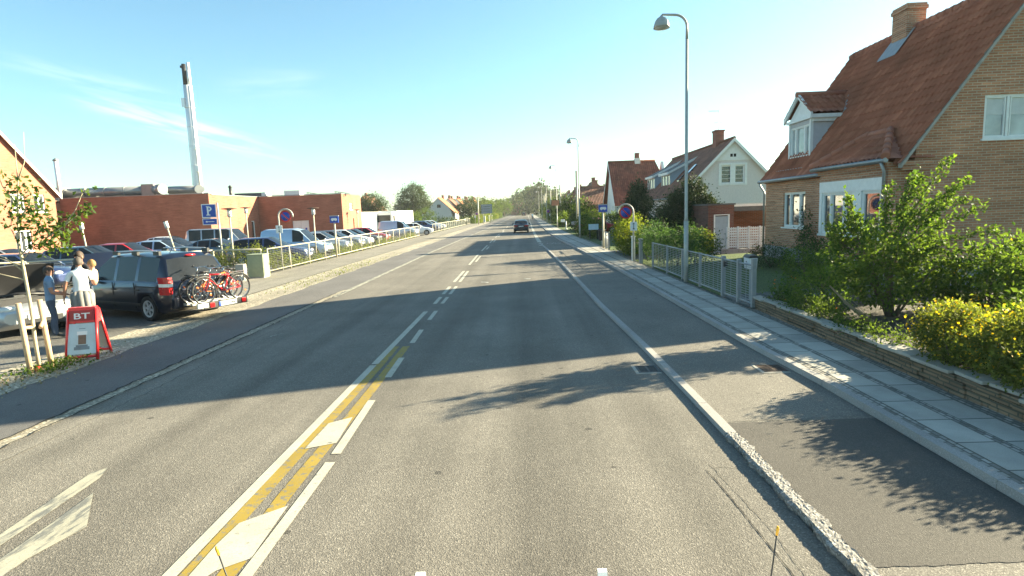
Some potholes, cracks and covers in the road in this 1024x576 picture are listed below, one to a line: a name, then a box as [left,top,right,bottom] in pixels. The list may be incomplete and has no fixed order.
drain grate [751,364,791,373]
drain grate [631,365,661,374]
crack [707,471,794,576]
